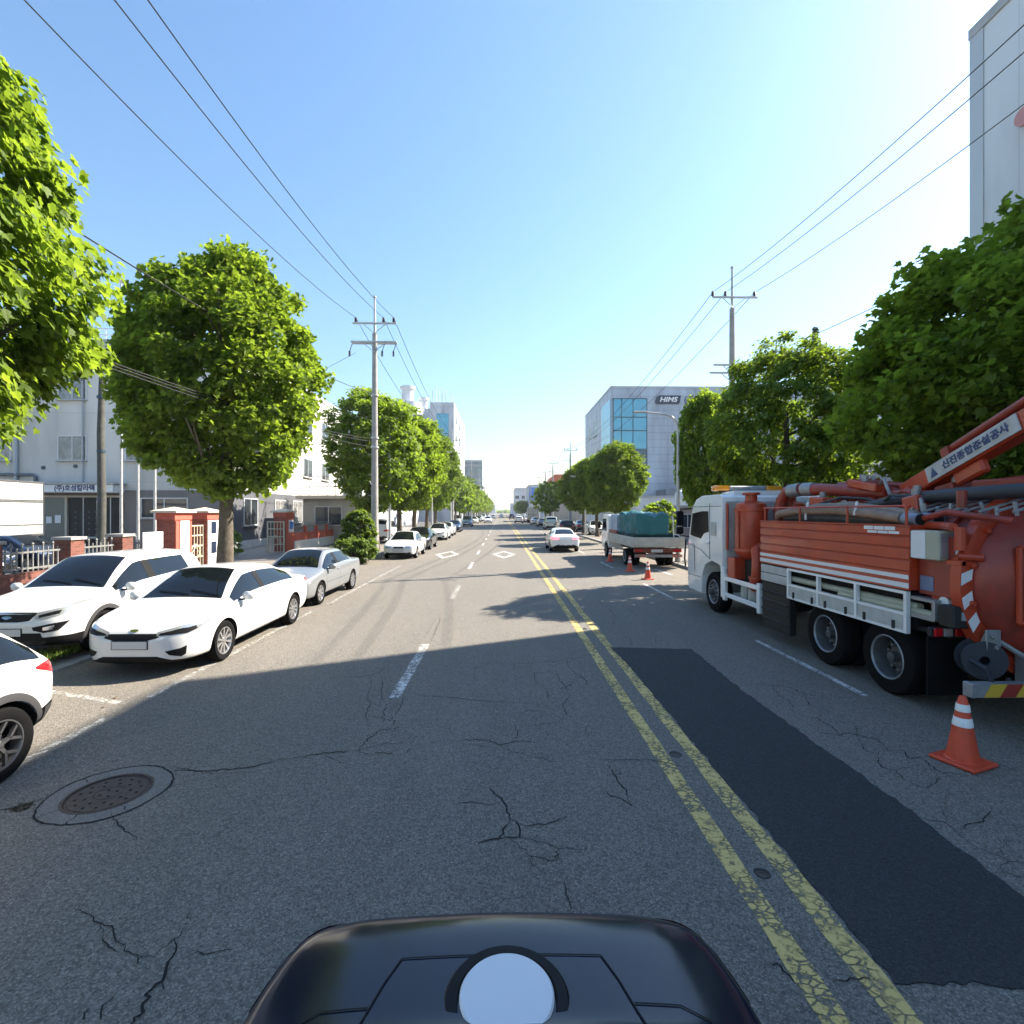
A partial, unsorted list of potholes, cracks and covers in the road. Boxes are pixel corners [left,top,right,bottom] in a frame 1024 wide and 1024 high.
crack [910,757,1023,878]
manhole cover [37,766,172,824]
utility cover [667,751,684,759]
crack [455,787,587,909]
utility cover [751,866,774,882]
crack [73,908,233,1024]
crack [2,657,589,839]
